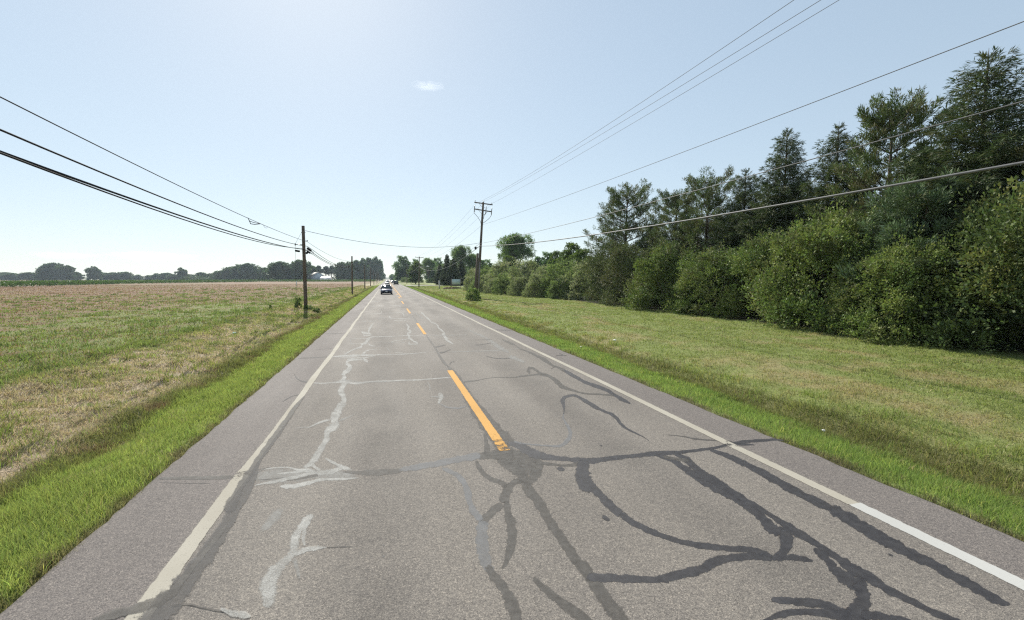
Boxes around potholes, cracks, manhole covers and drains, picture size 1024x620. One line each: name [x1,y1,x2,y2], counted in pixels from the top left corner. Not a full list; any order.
crack [259,510,352,607]
